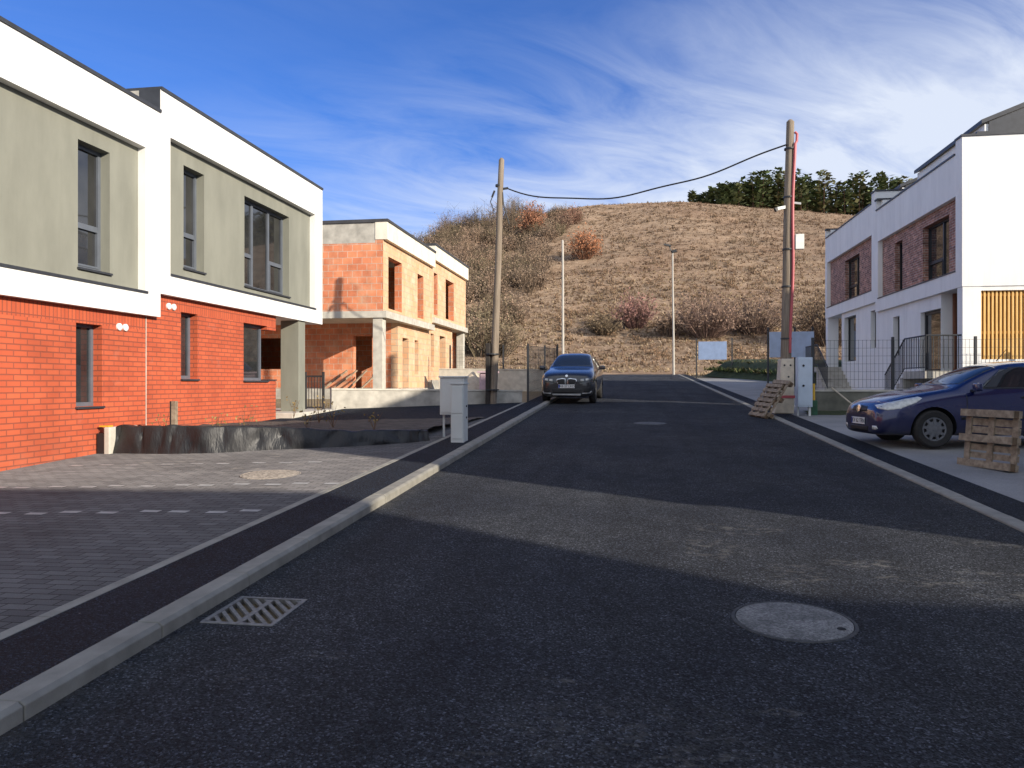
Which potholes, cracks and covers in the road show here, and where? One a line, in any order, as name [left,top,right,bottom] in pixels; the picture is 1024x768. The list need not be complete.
manhole cover [240,470,301,479]
manhole cover [731,601,859,643]
drain grate [200,596,308,627]
